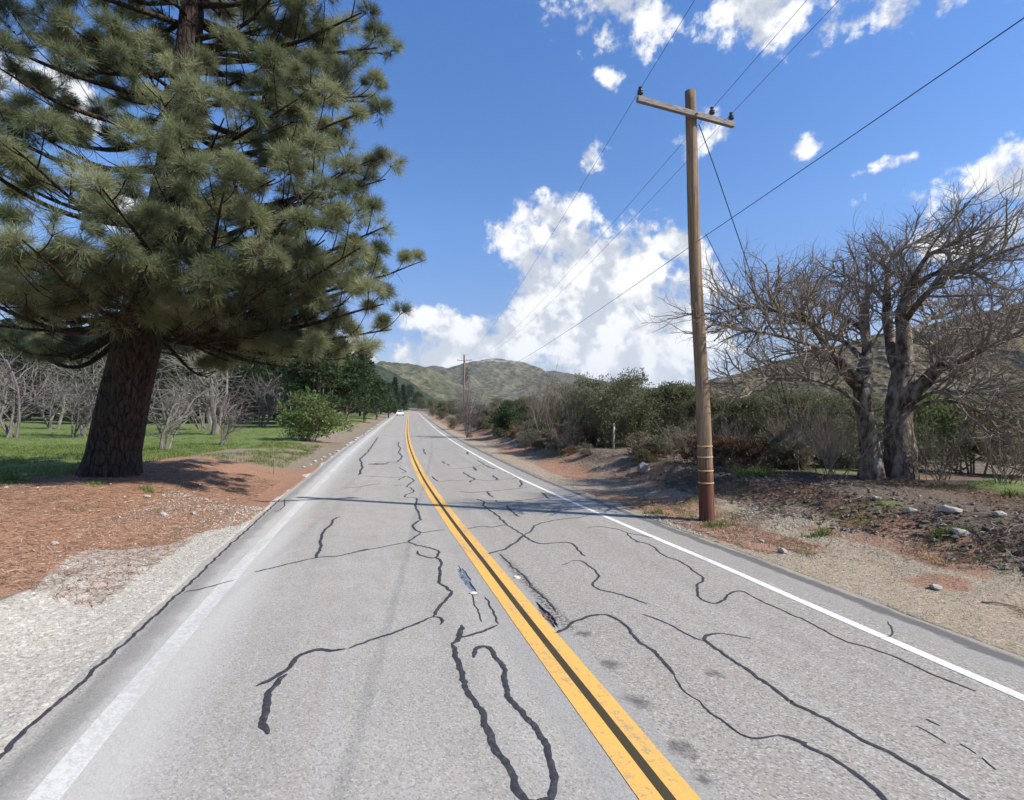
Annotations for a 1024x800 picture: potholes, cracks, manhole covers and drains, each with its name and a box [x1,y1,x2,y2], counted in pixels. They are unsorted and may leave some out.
pothole [457,565,477,596]
crack [472,594,499,624]
pothole [535,601,559,628]
crack [351,437,568,514]
crack [917,719,995,769]
